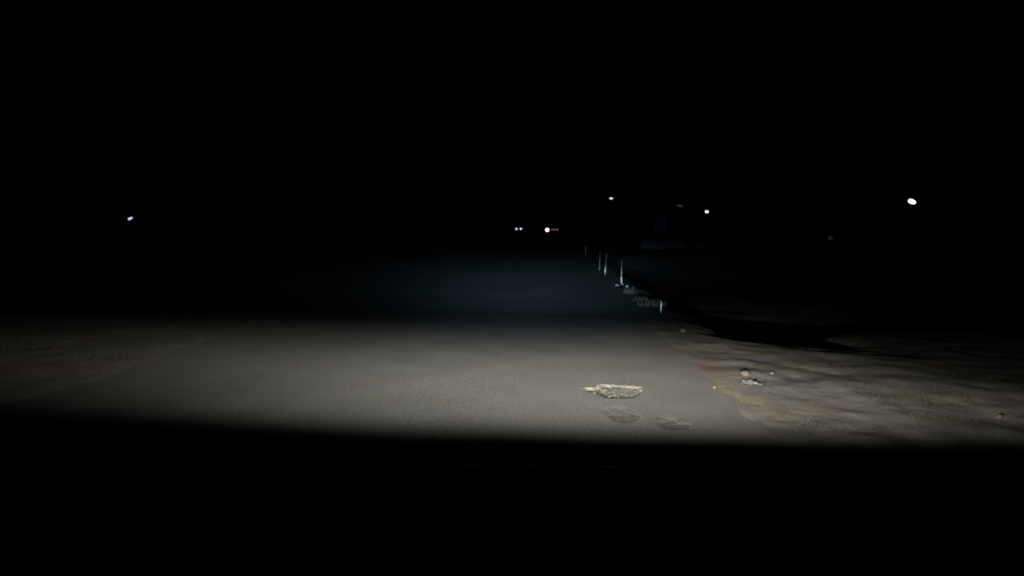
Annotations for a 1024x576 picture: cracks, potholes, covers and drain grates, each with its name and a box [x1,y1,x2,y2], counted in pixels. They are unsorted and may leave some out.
pothole [601,406,642,423]
pothole [653,414,692,430]
pothole [580,384,643,399]
